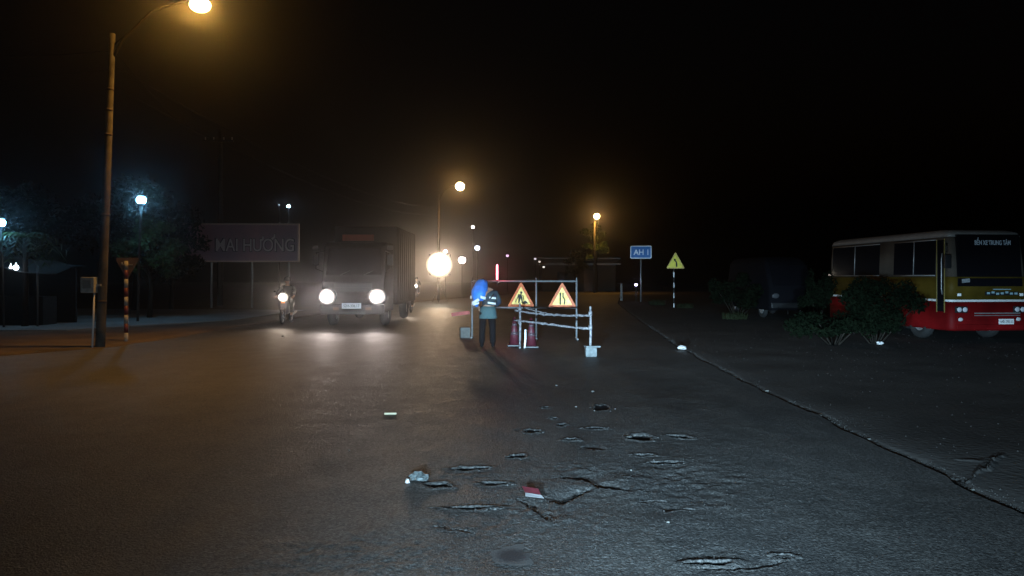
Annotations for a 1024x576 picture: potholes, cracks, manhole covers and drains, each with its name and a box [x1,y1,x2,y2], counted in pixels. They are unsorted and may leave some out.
pothole [590,403,616,412]
pothole [670,558,750,570]
pothole [418,481,459,490]
pothole [440,465,501,473]
crack [910,453,1008,487]
crack [514,478,696,523]
pothole [621,432,660,442]
pothole [765,553,806,563]
